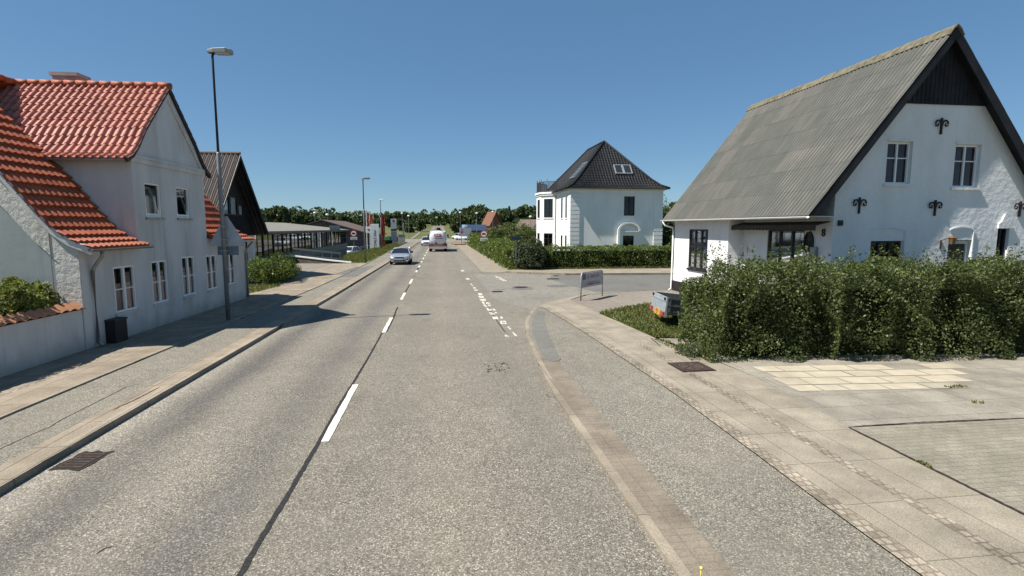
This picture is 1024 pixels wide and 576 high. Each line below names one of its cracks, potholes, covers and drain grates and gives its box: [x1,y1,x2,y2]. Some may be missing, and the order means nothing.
manhole cover [667,361,717,372]
drain grate [49,450,115,471]
